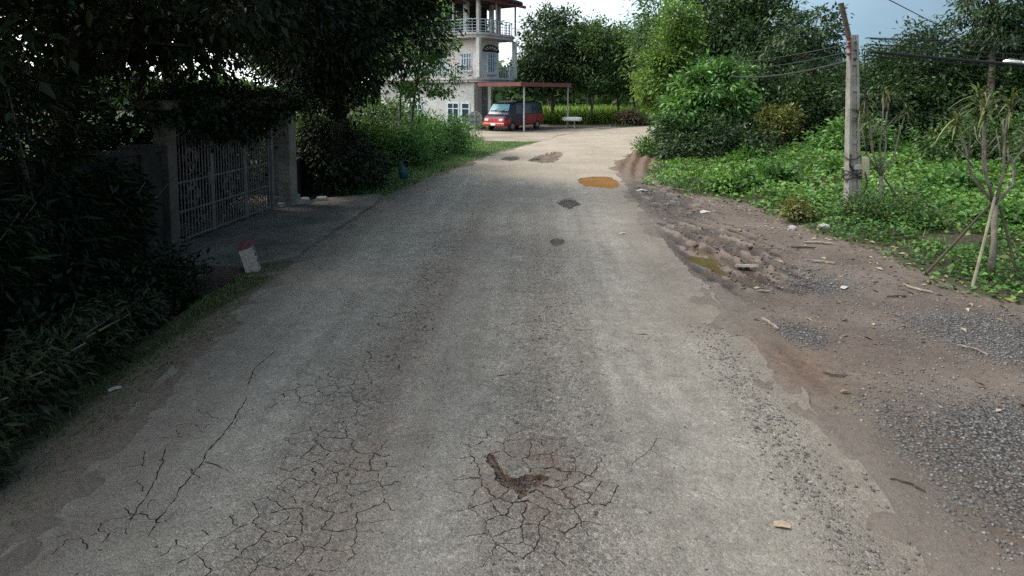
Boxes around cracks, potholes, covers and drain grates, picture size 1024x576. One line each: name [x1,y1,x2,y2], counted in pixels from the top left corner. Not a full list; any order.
pothole [485,453,549,499]
crack [51,336,399,576]
crack [627,438,687,470]
crack [450,420,619,567]
